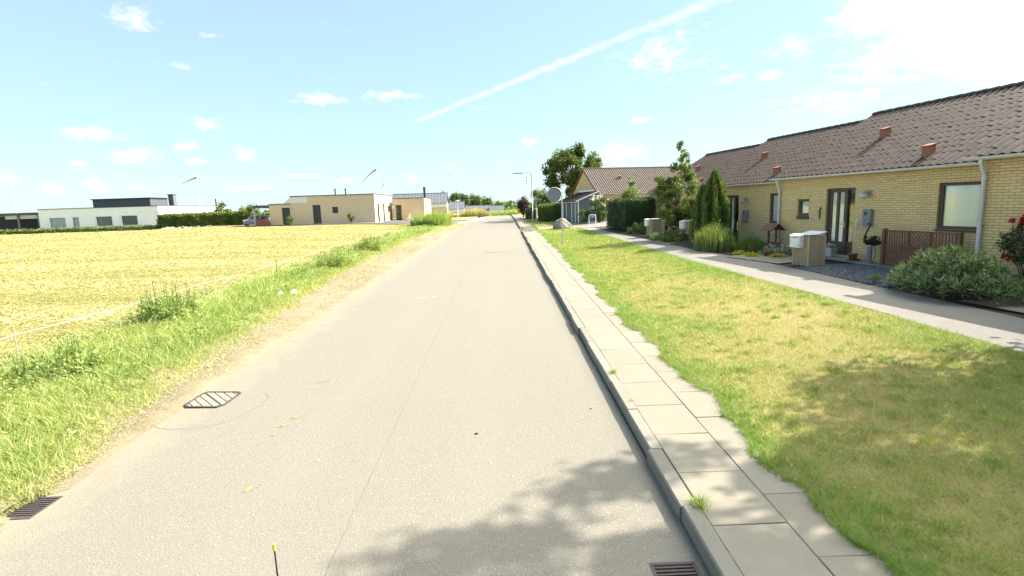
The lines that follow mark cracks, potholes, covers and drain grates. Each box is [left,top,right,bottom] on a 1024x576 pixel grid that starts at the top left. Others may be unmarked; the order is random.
drain grate [1,496,63,520]
drain grate [649,561,702,576]
